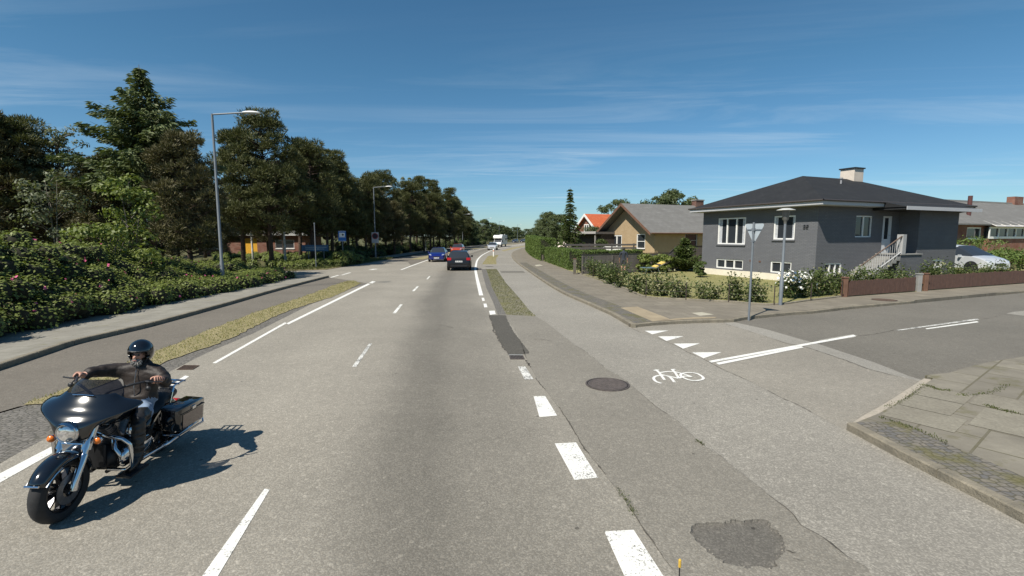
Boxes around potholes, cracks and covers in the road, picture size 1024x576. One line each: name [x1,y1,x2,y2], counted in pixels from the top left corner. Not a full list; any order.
manhole cover [585,377,630,391]
